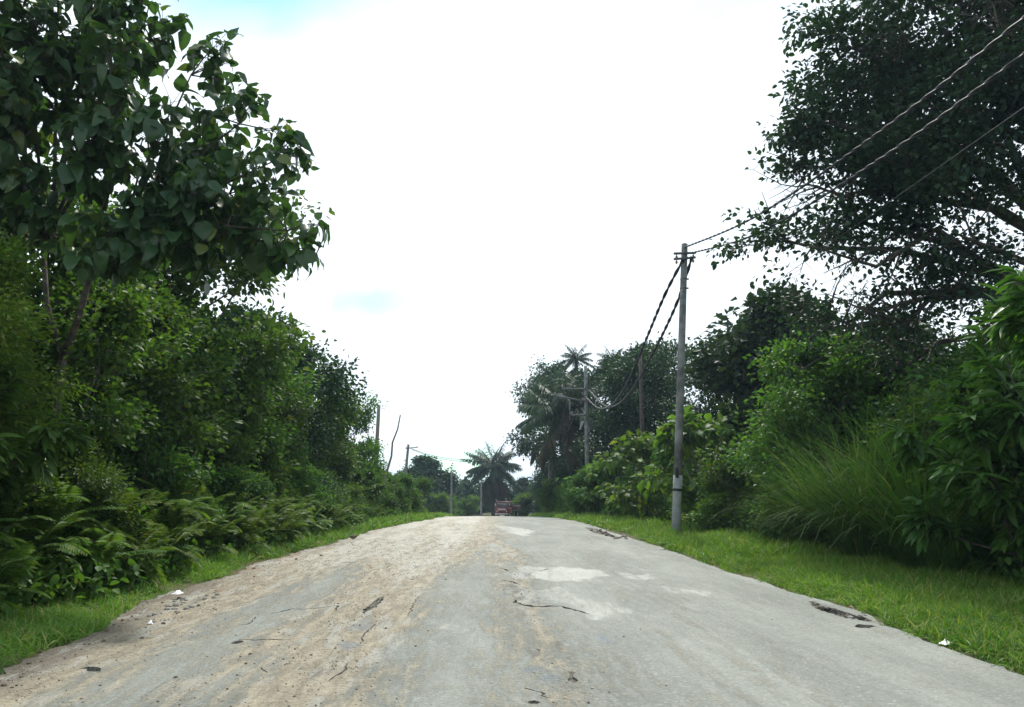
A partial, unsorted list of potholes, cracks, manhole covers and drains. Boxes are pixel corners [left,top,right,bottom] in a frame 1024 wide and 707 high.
crack [500,568,588,614]
pothole [808,601,872,621]
